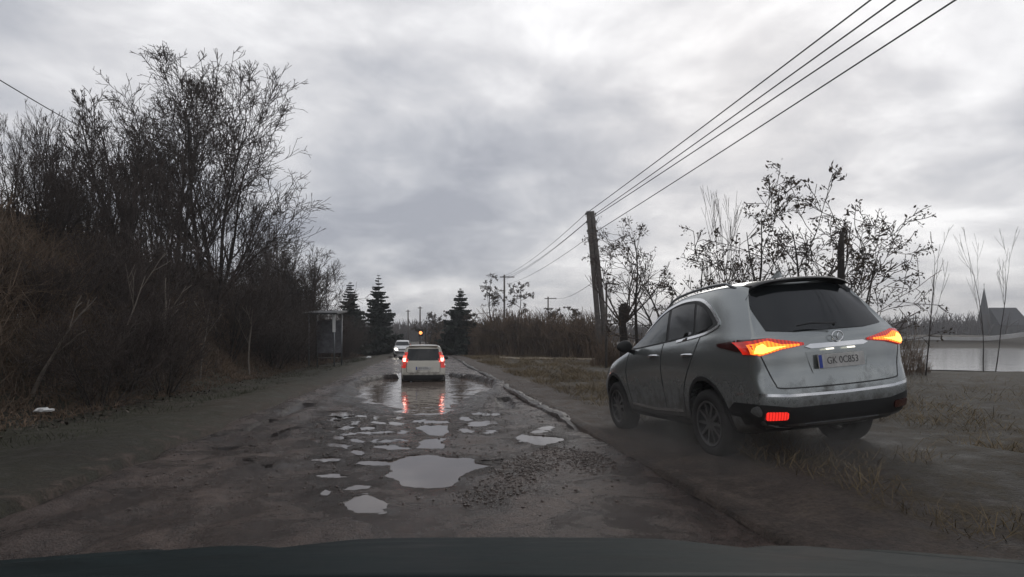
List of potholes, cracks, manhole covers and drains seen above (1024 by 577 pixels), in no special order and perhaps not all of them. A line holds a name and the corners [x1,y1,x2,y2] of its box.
pothole [413,425,449,436]
pothole [516,434,565,446]
pothole [333,372,498,417]
pothole [342,493,389,514]
pothole [417,438,447,450]
pothole [356,454,492,488]
